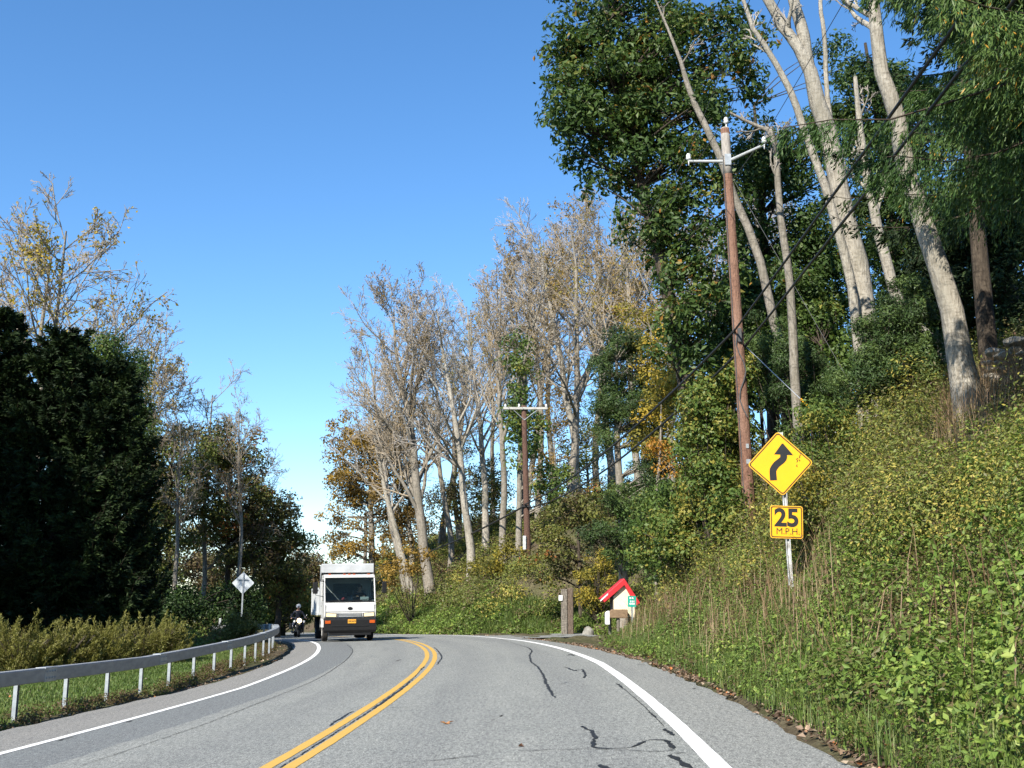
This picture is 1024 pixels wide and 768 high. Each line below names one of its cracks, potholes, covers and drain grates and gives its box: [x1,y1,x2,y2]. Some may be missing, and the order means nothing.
crack [616,683,674,735]
